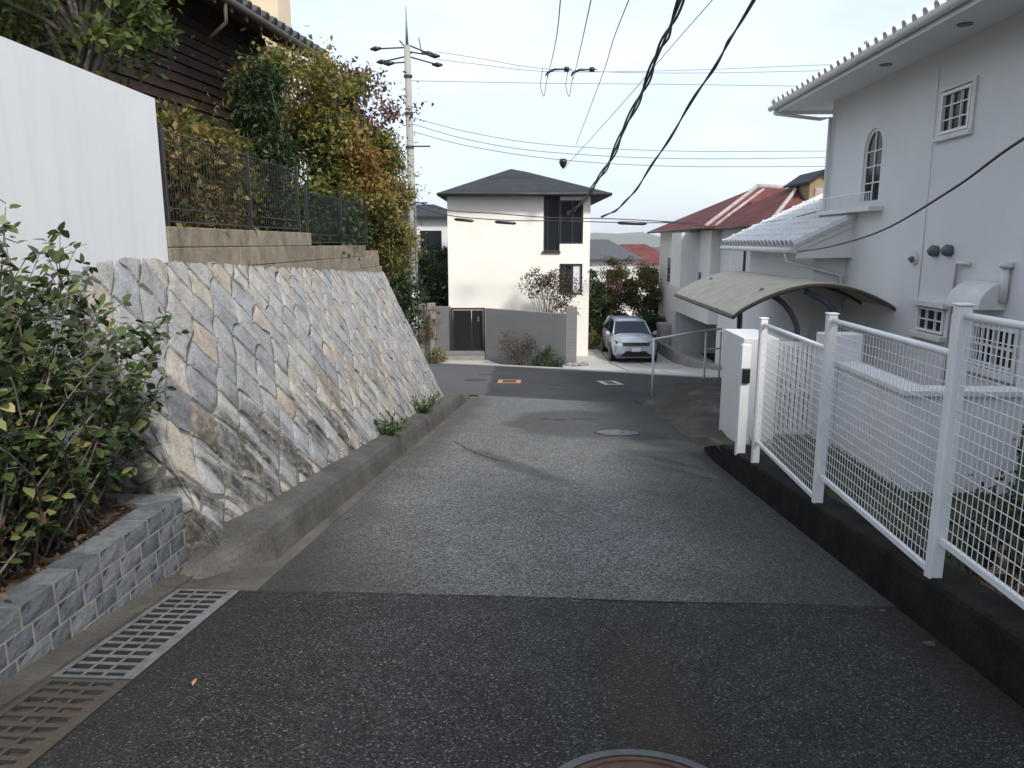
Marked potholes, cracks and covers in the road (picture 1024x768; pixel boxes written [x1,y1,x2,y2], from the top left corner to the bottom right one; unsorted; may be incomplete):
manhole cover [558,749,708,768]
drain grate [51,589,240,682]
drain grate [0,678,131,768]
